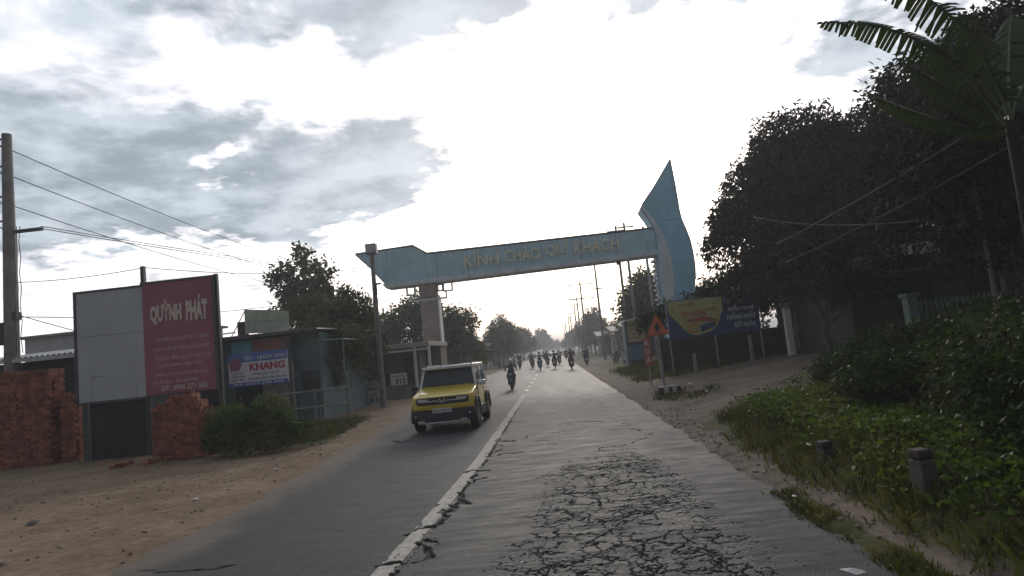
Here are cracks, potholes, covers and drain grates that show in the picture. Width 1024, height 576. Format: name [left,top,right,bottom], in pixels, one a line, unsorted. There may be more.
crack [155,566,225,574]
crack [526,421,652,451]
